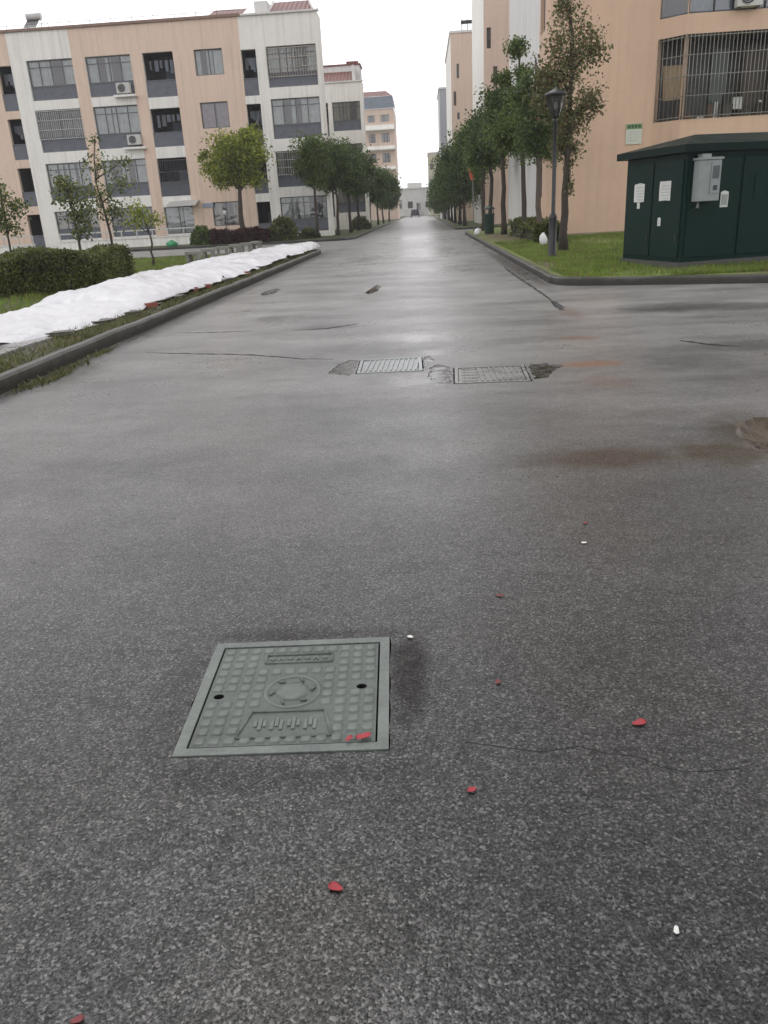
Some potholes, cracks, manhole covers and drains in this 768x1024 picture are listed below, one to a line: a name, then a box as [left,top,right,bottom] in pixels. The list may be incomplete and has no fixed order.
pothole [735,417,768,454]
manhole cover [171,637,391,758]
crack [466,742,740,772]
